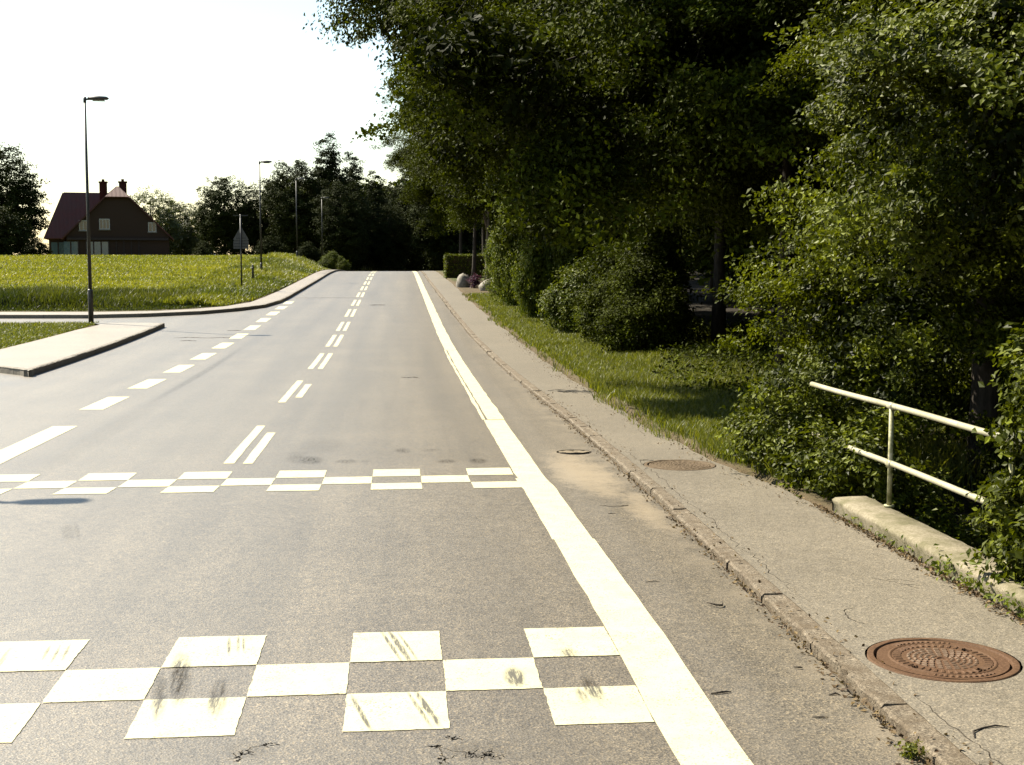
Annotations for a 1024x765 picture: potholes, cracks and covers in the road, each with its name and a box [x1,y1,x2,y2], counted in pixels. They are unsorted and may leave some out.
manhole cover [644,459,715,471]
crack [426,735,505,765]
crack [228,743,279,762]
crack [624,449,810,602]
manhole cover [867,638,1020,683]
